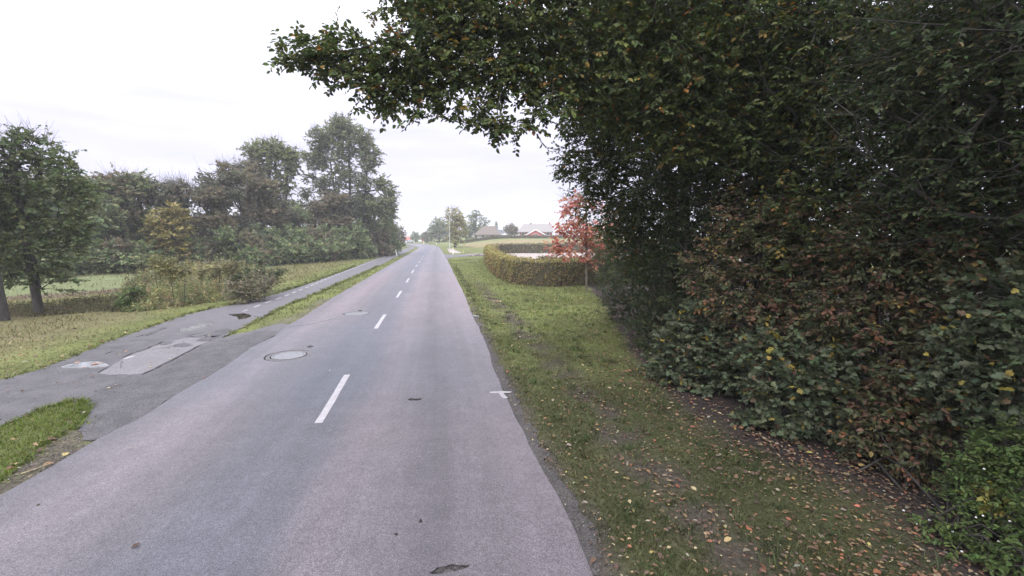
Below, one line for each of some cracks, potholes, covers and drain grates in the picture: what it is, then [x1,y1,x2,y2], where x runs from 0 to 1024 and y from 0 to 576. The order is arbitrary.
manhole cover [264,350,313,361]
pothole [430,564,471,575]
